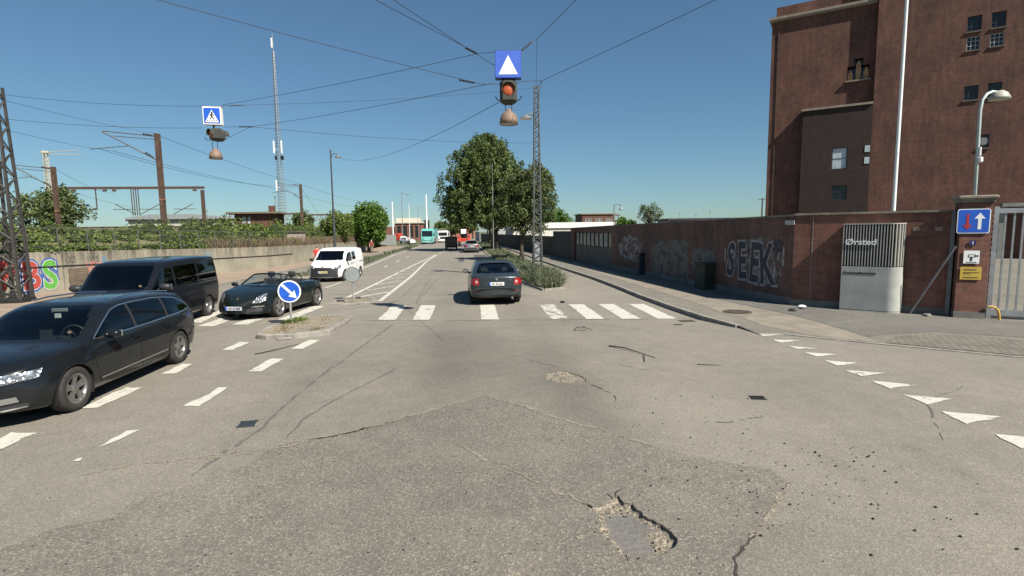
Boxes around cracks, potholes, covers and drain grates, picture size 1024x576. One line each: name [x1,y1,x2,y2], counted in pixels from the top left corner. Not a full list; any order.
pothole [581,495,678,560]
pothole [545,371,586,384]
crack [732,482,789,576]
